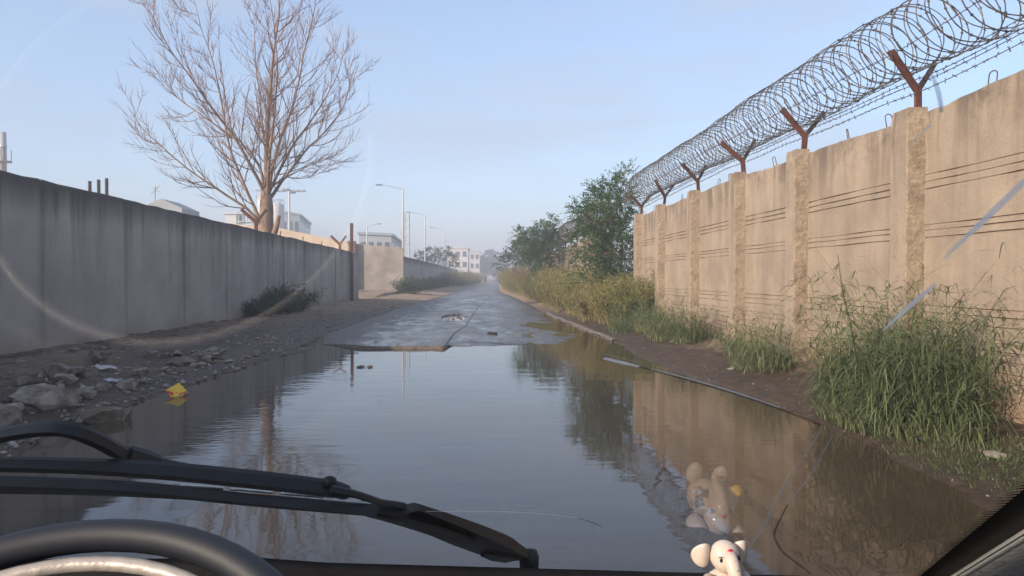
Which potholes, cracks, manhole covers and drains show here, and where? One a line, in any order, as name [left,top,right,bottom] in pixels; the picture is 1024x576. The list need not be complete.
crack [446,298,526,345]
pothole [440,314,470,322]
